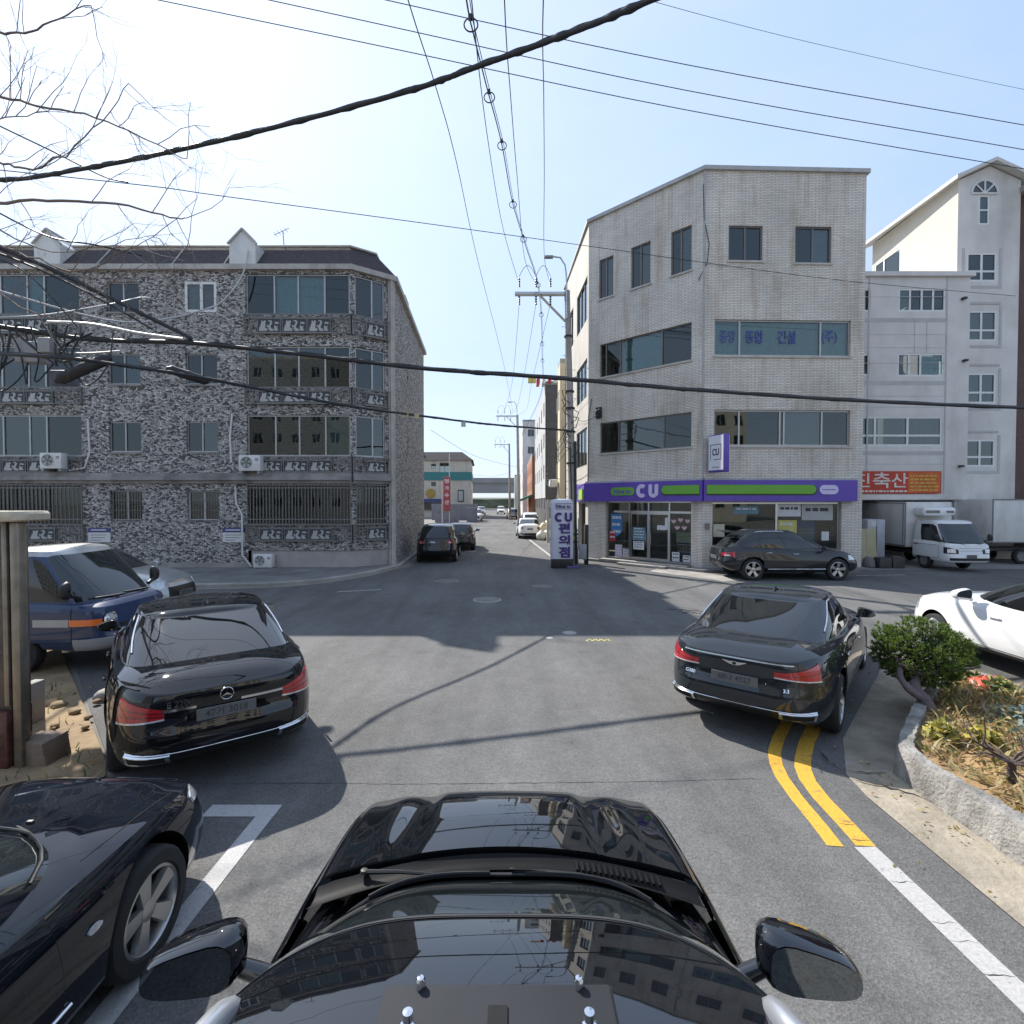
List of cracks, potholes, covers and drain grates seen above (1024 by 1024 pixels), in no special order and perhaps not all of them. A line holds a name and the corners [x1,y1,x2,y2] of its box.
crack [817,748,926,800]
